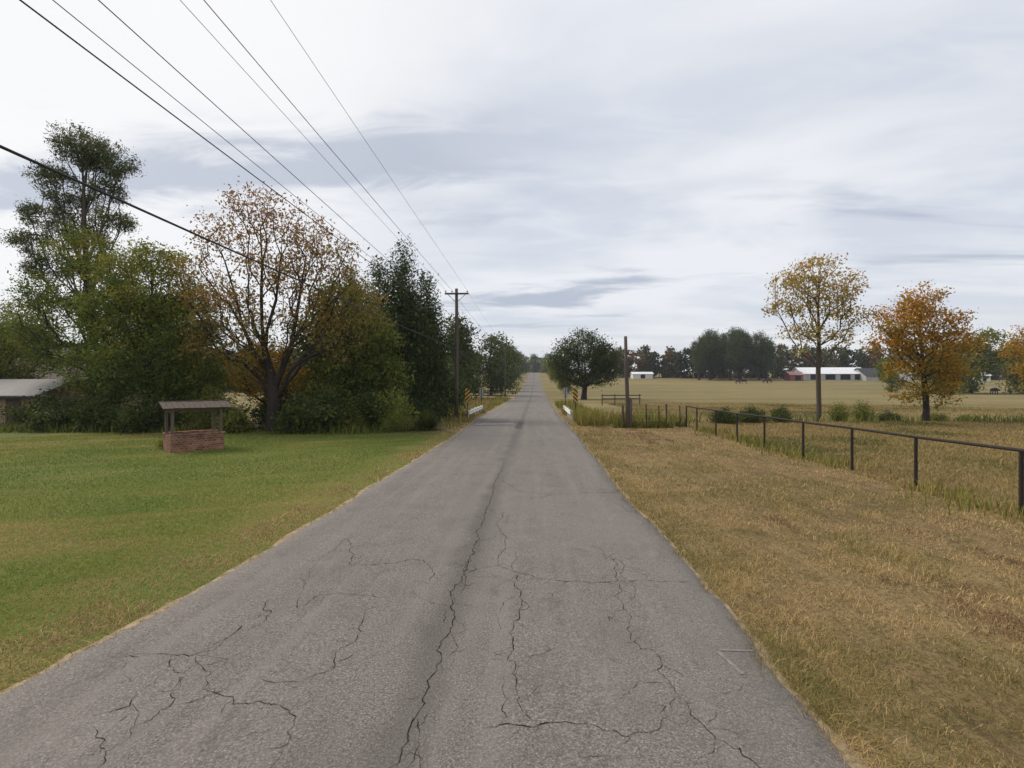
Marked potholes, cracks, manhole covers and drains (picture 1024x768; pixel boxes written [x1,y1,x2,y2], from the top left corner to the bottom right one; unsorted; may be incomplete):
crack [389,473,511,768]
crack [290,536,435,605]
crack [459,511,759,767]
crack [83,603,317,767]
crack [262,606,399,688]
